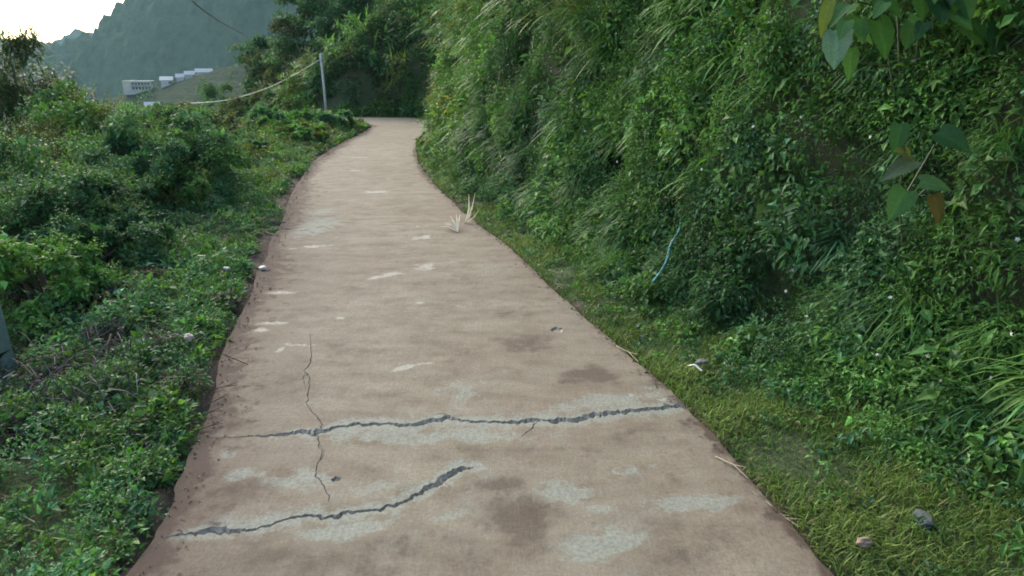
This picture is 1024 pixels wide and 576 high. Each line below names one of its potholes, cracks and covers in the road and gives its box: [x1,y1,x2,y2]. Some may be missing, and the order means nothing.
crack [164,333,686,539]
